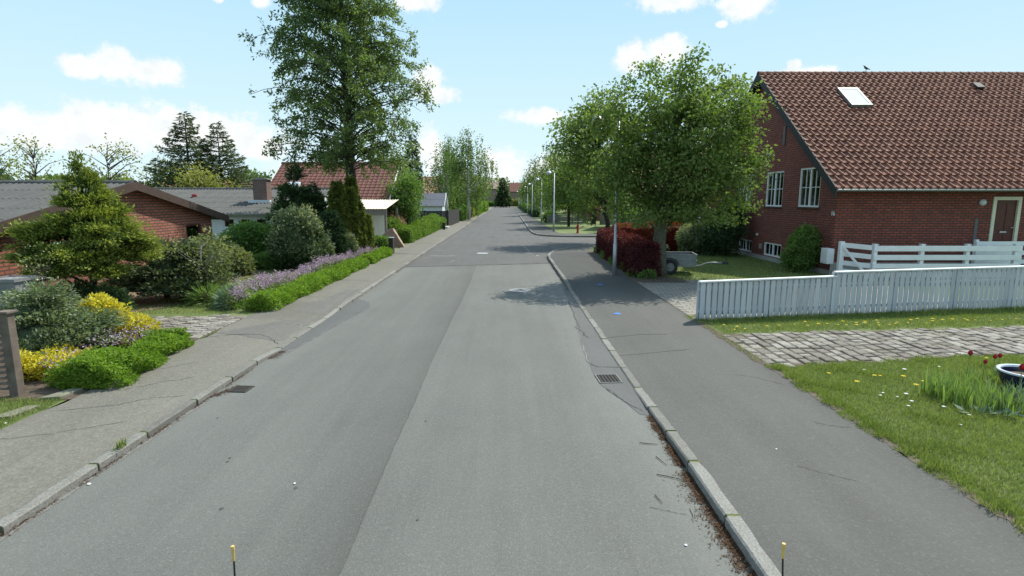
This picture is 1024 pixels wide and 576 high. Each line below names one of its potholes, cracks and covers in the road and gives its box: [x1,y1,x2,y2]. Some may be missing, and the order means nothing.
drain grate [594,374,623,383]
crack [568,301,598,367]
